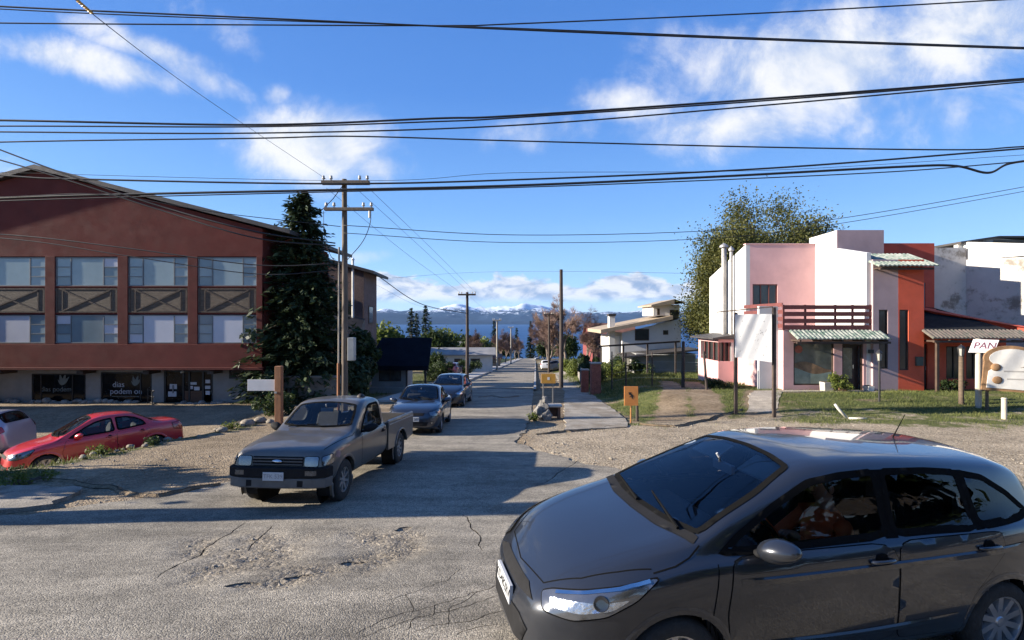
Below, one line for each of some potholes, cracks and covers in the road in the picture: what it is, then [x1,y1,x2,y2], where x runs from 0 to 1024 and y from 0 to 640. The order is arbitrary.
crack [158,526,272,577]
crack [357,568,503,637]
